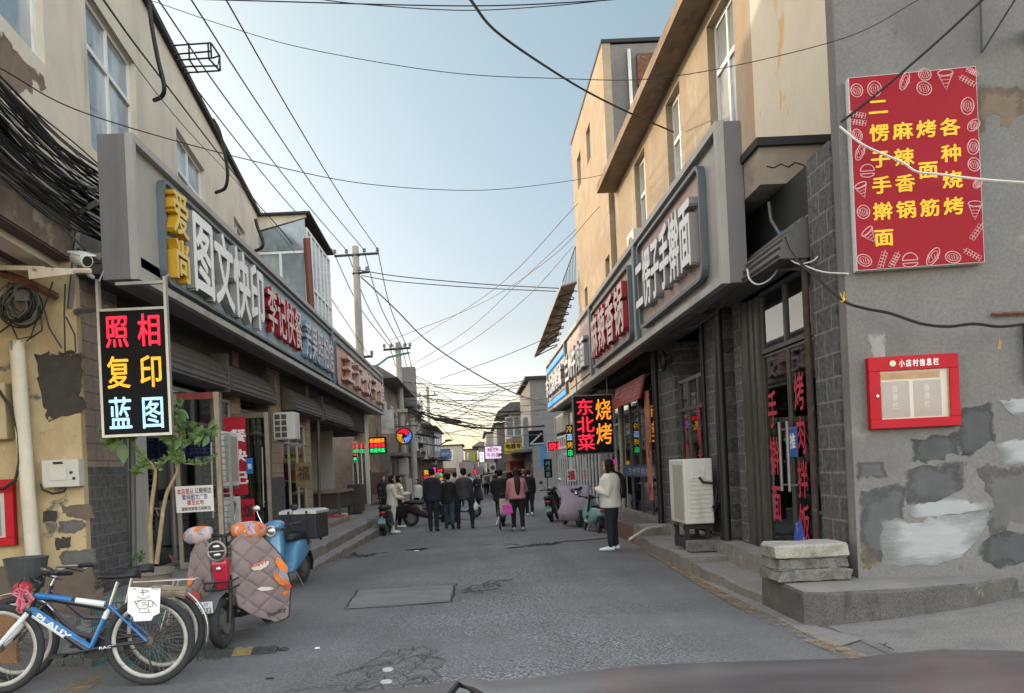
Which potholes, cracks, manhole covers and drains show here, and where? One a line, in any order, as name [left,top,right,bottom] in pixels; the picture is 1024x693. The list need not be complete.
crack [284,646,445,692]
